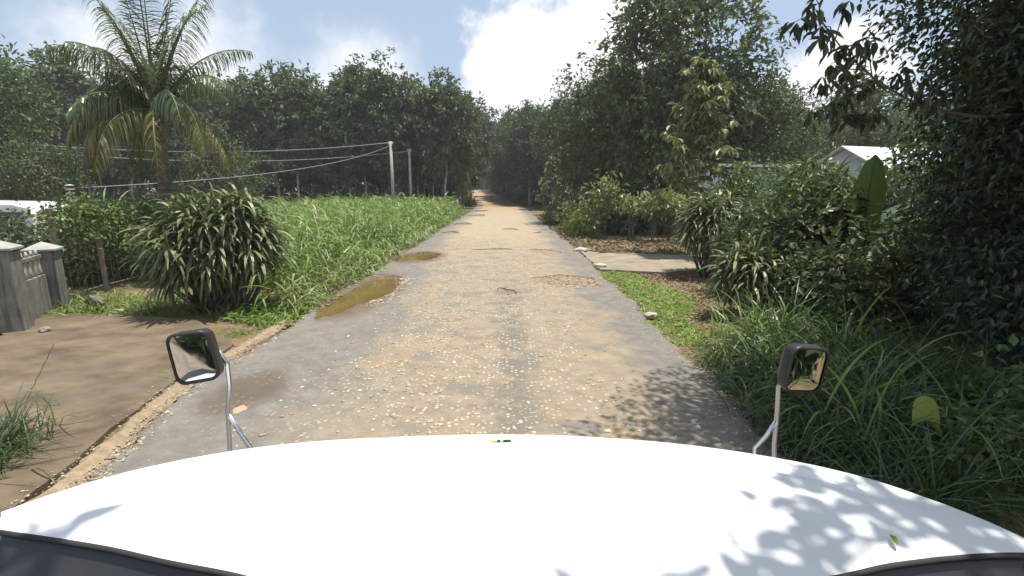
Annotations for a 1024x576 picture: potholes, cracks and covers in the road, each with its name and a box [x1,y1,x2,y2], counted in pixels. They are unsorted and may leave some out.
pothole [389,251,443,262]
pothole [311,275,405,322]
pothole [527,274,603,289]
